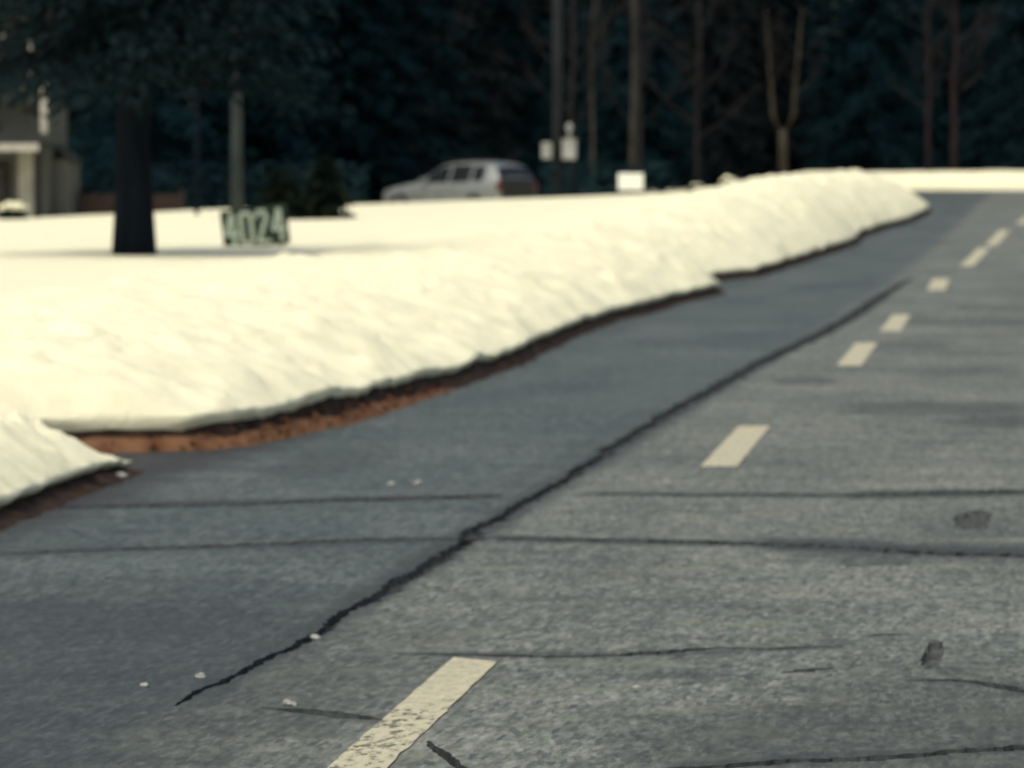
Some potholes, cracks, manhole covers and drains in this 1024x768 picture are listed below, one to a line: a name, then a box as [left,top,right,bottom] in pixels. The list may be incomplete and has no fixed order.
crack [263,707,384,721]
pothole [920,640,945,669]
crack [10,537,1024,558]
pothole [953,509,993,530]
crack [397,646,832,658]
crack [581,489,1024,497]
crack [60,495,500,508]
crack [427,741,468,768]
